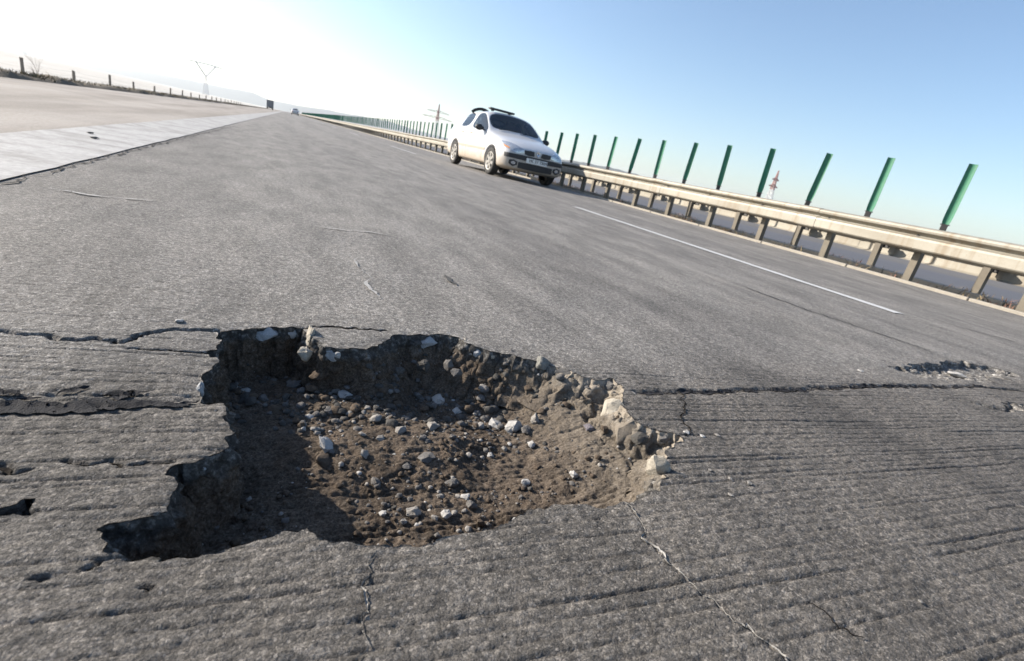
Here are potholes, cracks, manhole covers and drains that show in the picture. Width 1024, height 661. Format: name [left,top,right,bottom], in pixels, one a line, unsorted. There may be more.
pothole [0,498,36,516]
pothole [96,327,683,562]
pothole [888,360,1021,384]
crack [112,334,208,354]
crack [807,601,864,638]
crack [355,555,373,661]
crack [626,503,788,661]
